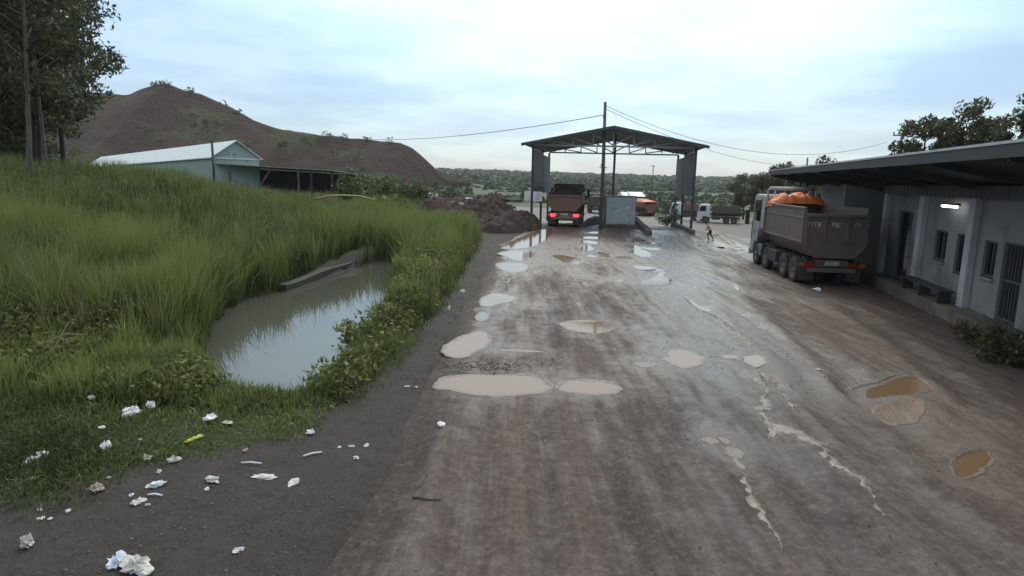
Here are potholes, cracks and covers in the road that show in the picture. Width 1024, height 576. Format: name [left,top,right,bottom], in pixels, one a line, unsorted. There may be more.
crack [726,367,941,551]
pothole [863,376,935,399]
pothole [558,320,615,334]
pothole [872,398,927,426]
pothole [638,272,672,286]
pothole [555,379,623,395]
pothole [495,262,530,273]
pothole [479,293,519,307]
pothole [441,331,492,358]
pothole [499,229,554,249]
pothole [949,448,995,479]
pothole [661,348,705,369]
